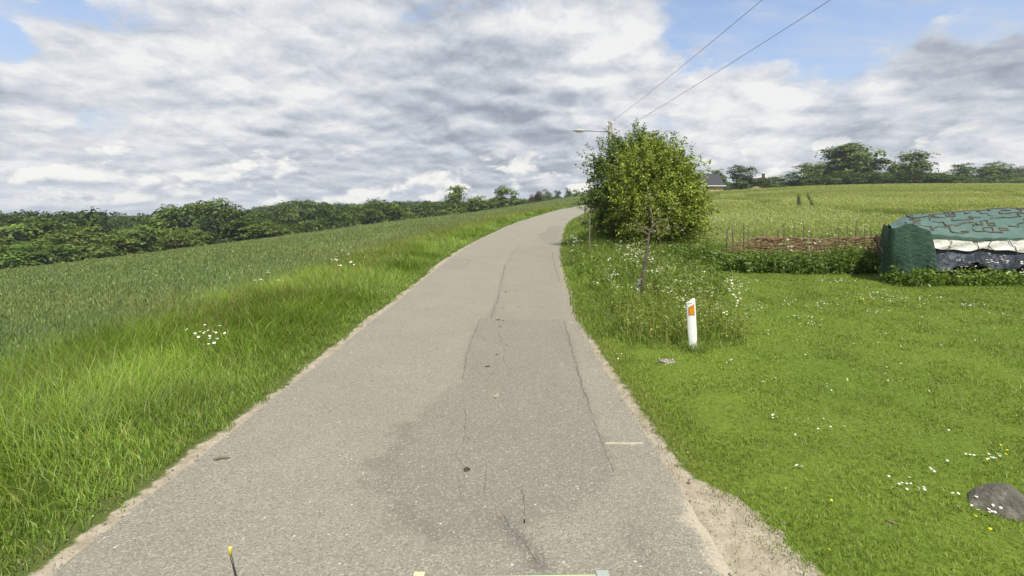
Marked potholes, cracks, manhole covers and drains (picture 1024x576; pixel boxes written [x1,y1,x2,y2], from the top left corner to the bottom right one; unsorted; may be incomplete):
crack [518,306,614,472]
crack [500,489,538,564]
